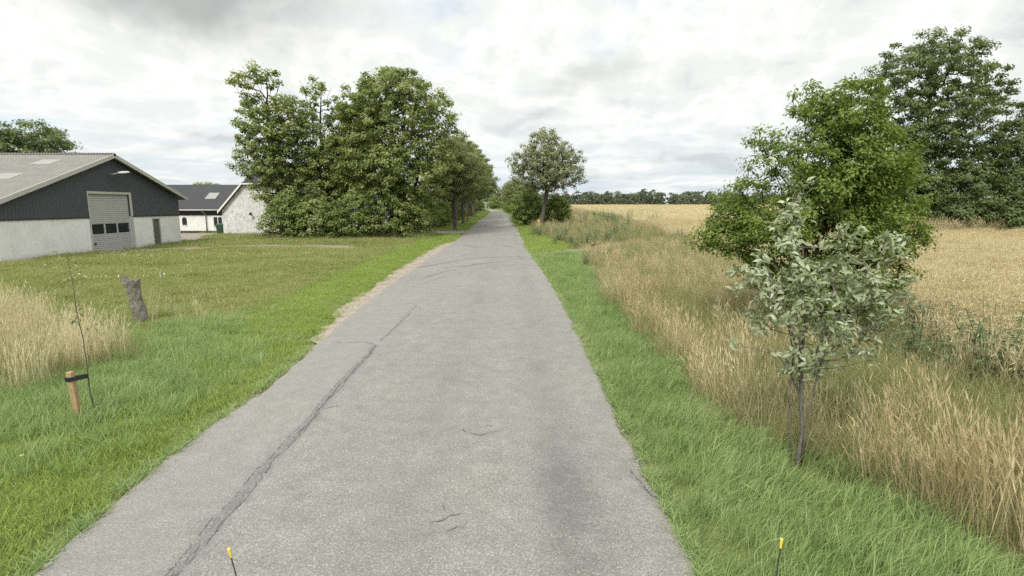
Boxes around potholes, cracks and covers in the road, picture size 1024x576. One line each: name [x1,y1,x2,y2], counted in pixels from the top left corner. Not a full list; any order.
crack [168,342,376,576]
